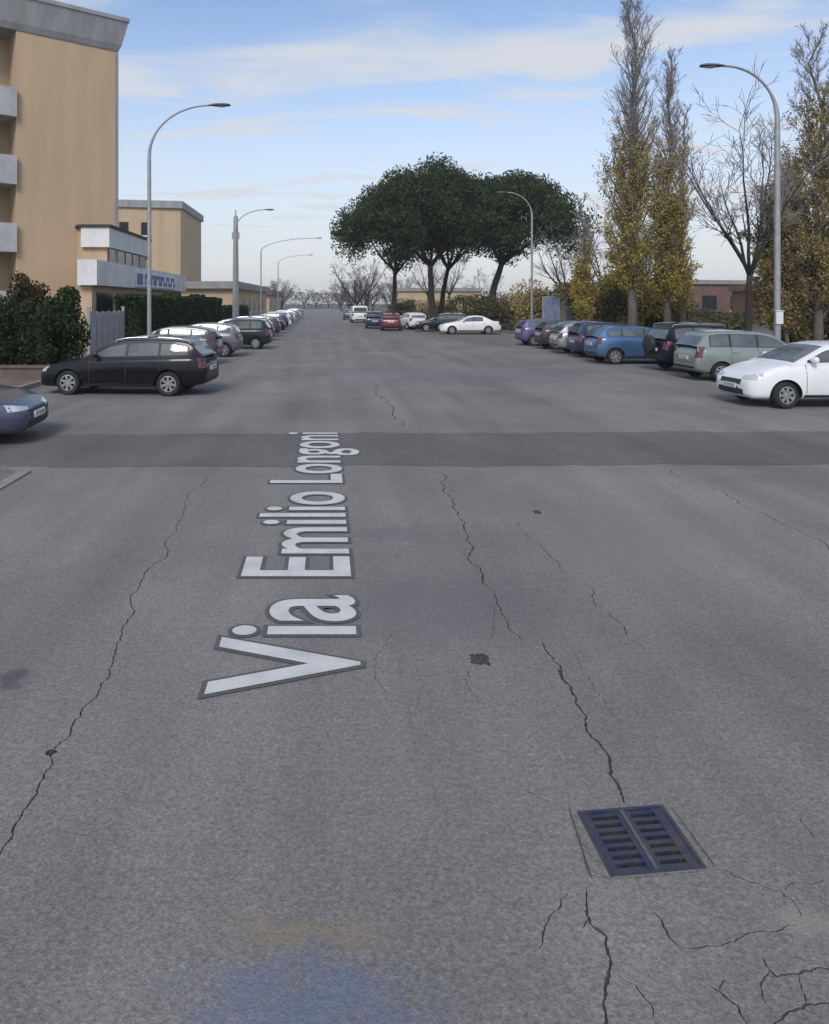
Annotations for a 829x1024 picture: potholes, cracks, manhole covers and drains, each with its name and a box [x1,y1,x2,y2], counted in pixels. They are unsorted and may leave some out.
crack [0,476,226,854]
crack [382,471,540,641]
crack [655,868,829,1024]
crack [539,888,657,1024]
crack [671,470,829,549]
